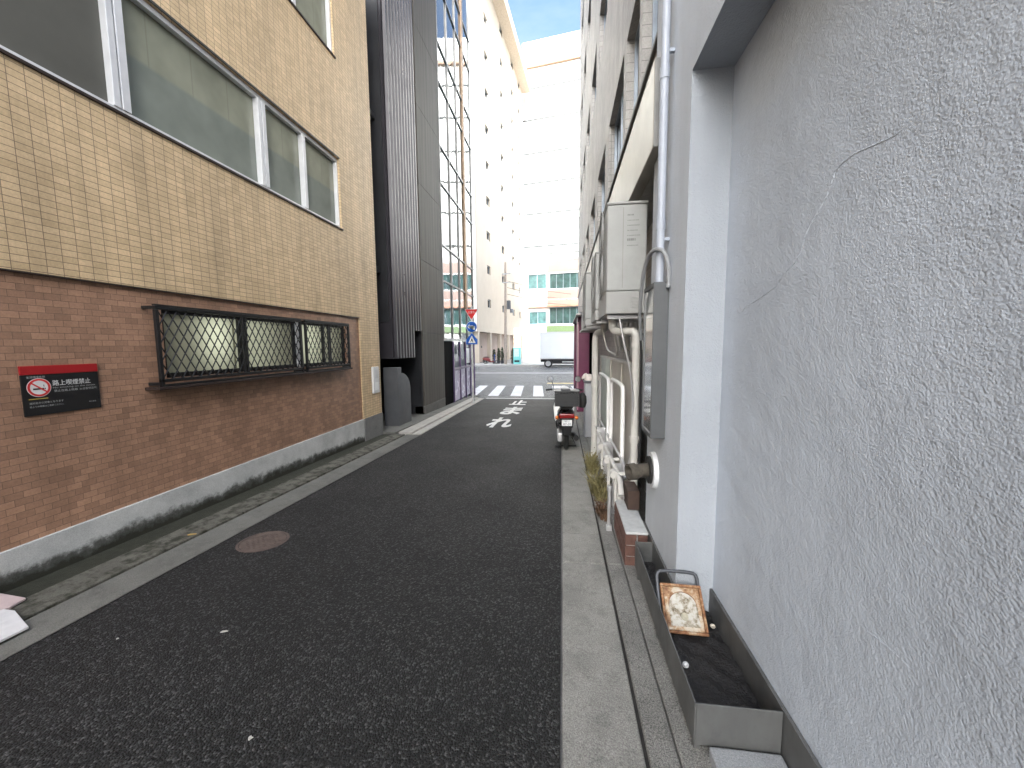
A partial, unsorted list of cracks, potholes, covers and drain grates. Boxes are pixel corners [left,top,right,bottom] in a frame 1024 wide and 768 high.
manhole cover [235,531,290,553]
